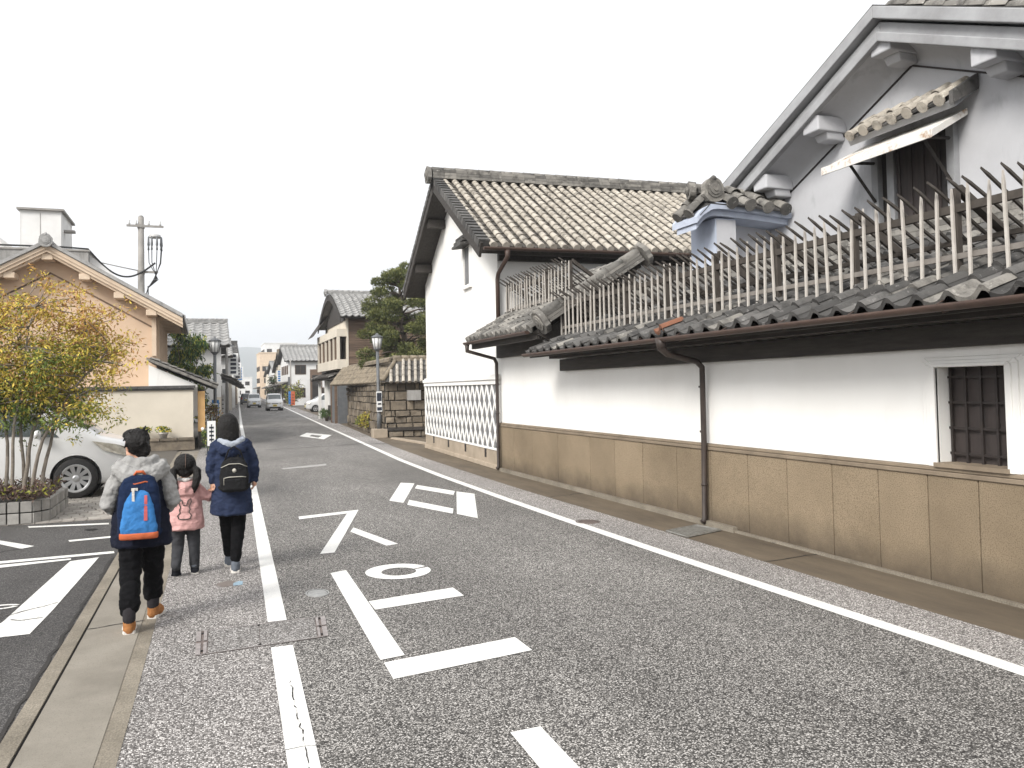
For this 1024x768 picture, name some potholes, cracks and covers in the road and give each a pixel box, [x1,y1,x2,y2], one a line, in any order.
utility cover [195,616,328,656]
utility cover [305,589,329,597]
crack [284,676,309,768]
drain grate [666,524,721,538]
